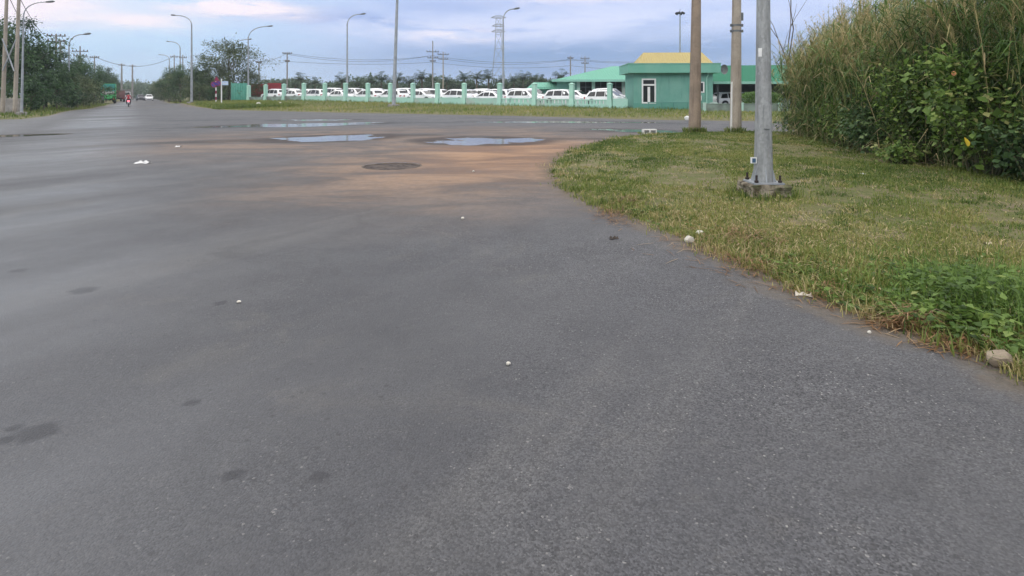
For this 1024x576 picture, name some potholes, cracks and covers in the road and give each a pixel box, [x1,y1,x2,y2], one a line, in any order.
manhole cover [361,162,422,170]
